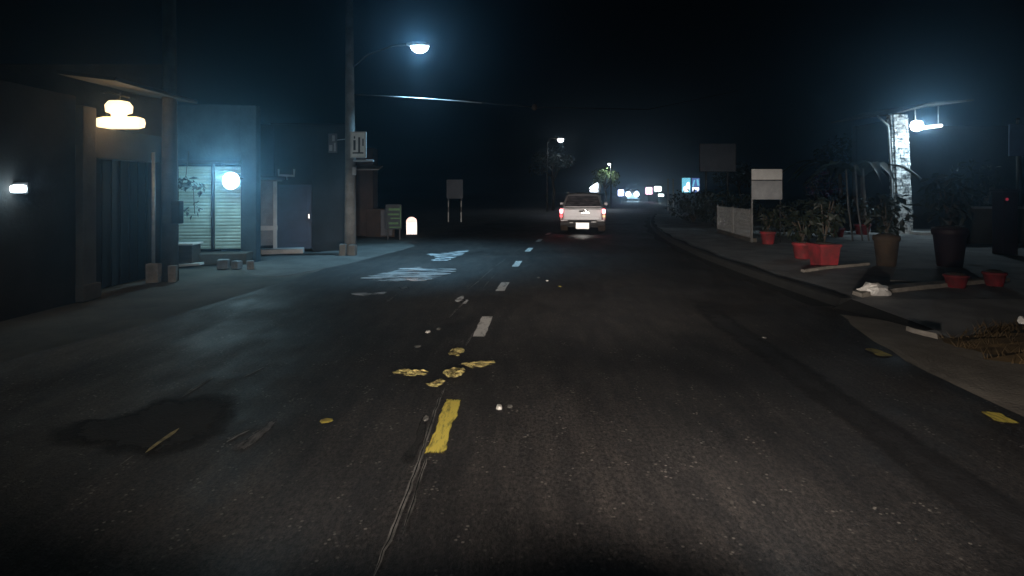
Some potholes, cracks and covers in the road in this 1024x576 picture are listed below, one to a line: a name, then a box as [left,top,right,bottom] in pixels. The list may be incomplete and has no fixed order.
pothole [58,396,233,455]
crack [373,387,445,576]
